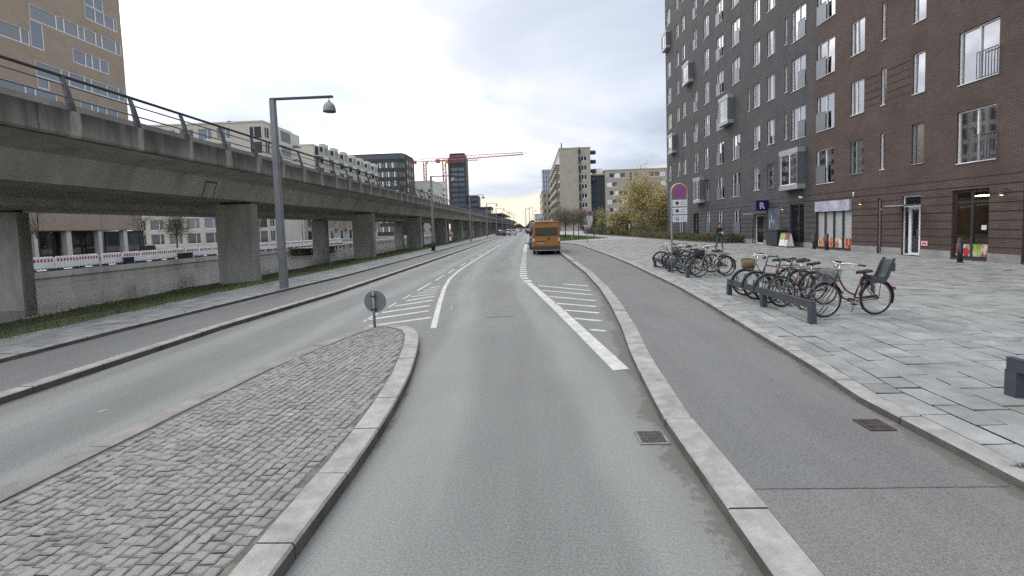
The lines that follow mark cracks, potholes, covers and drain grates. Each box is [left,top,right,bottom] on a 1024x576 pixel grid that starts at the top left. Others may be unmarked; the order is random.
drain grate [852,419,897,431]
drain grate [634,430,671,445]
